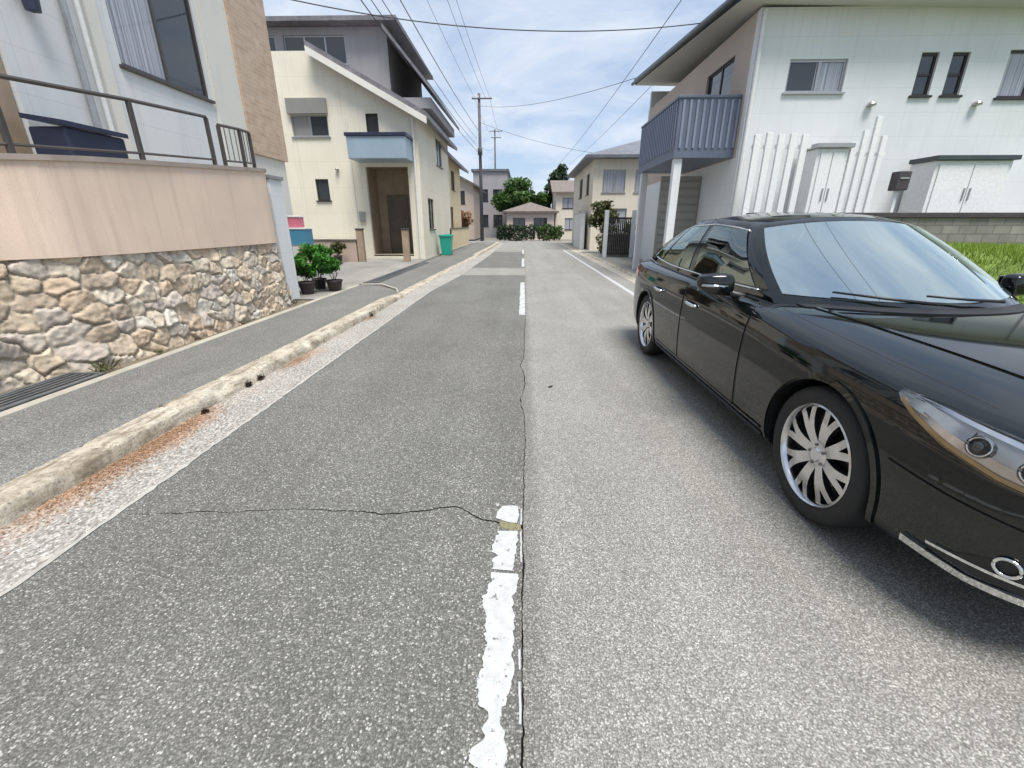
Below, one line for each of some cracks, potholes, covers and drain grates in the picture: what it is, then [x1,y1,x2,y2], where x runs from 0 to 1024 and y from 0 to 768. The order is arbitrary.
crack [129,506,500,524]
drain grate [0,372,106,412]
